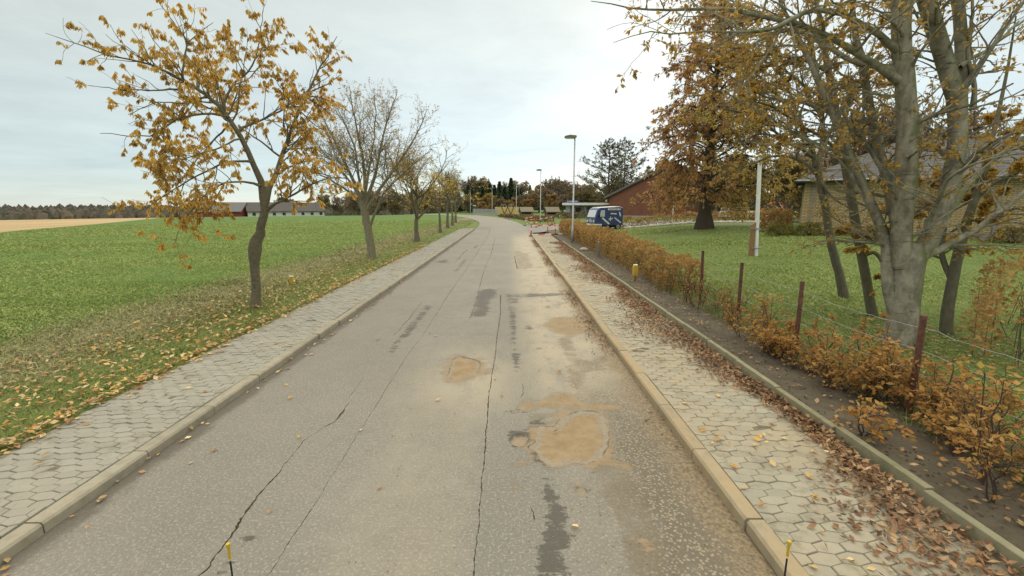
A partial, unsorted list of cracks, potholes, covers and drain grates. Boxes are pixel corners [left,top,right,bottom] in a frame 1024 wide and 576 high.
crack [473,295,501,576]
pothole [510,433,529,447]
pothole [447,356,481,380]
pothole [527,410,610,467]
crack [198,228,491,576]
